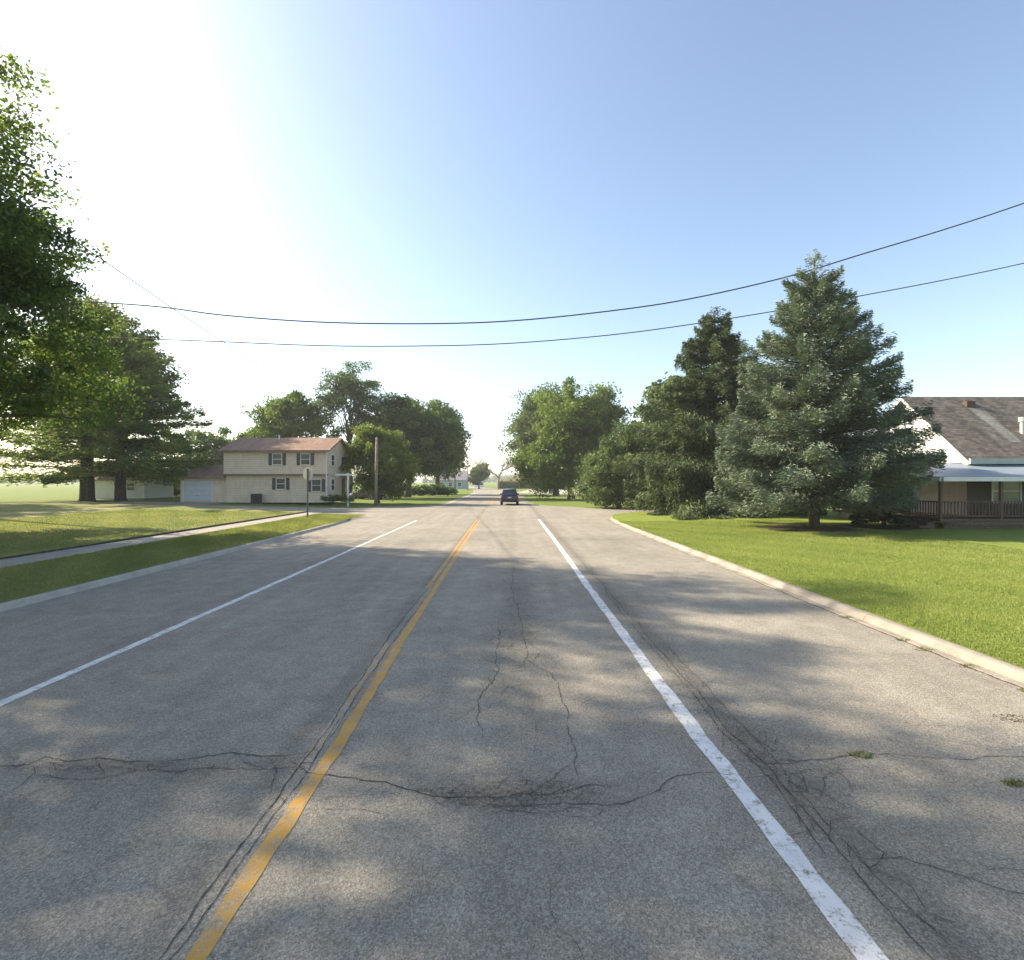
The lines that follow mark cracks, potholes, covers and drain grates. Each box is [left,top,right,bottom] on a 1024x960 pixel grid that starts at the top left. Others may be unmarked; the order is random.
crack [473,567,588,736]
crack [3,751,309,802]
crack [292,724,742,824]
crack [742,731,1024,798]
crack [875,856,1024,894]
